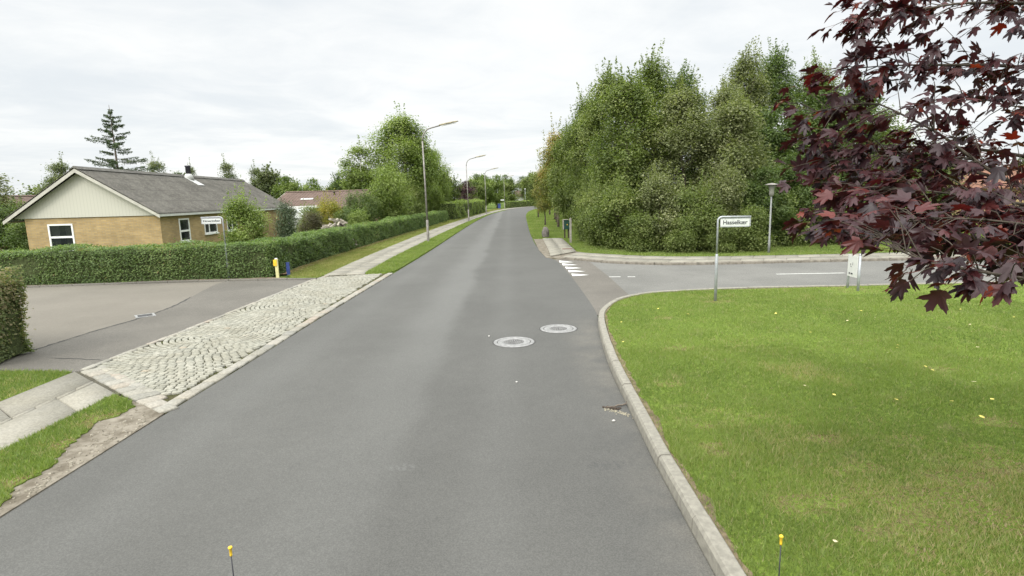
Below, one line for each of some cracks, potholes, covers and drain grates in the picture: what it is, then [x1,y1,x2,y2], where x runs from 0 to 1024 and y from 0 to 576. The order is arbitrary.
manhole cover [492,337,536,348]
manhole cover [539,324,578,333]
